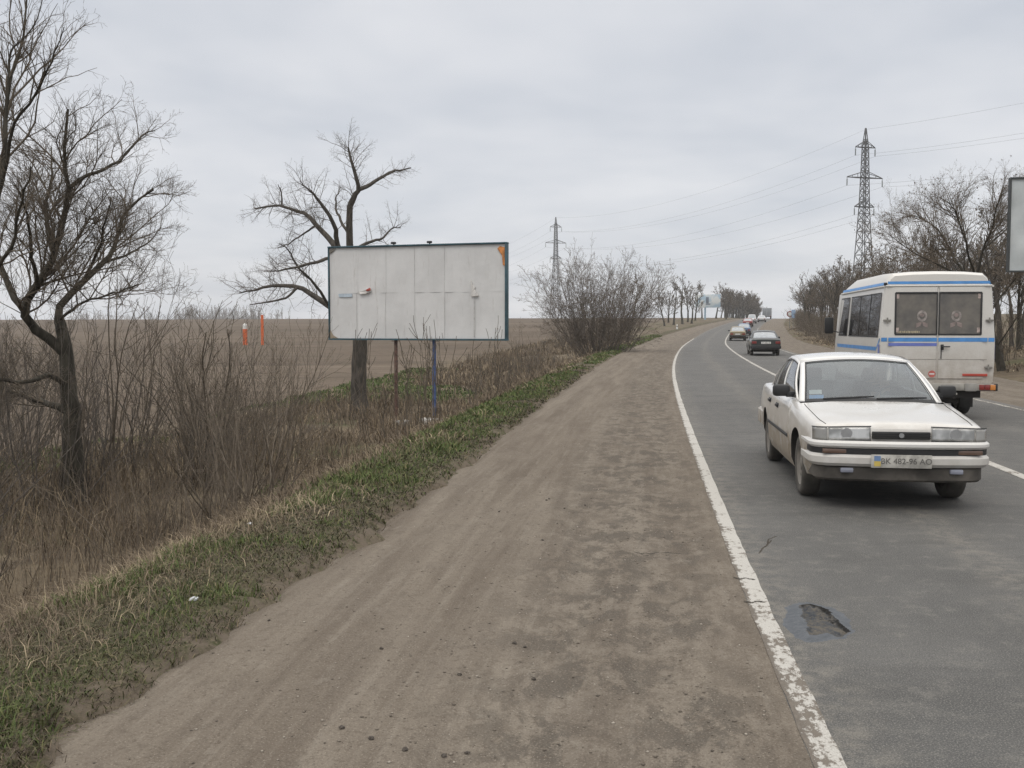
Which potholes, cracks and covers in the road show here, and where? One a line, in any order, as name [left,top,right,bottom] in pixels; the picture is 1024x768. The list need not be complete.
pothole [782,602,855,642]
